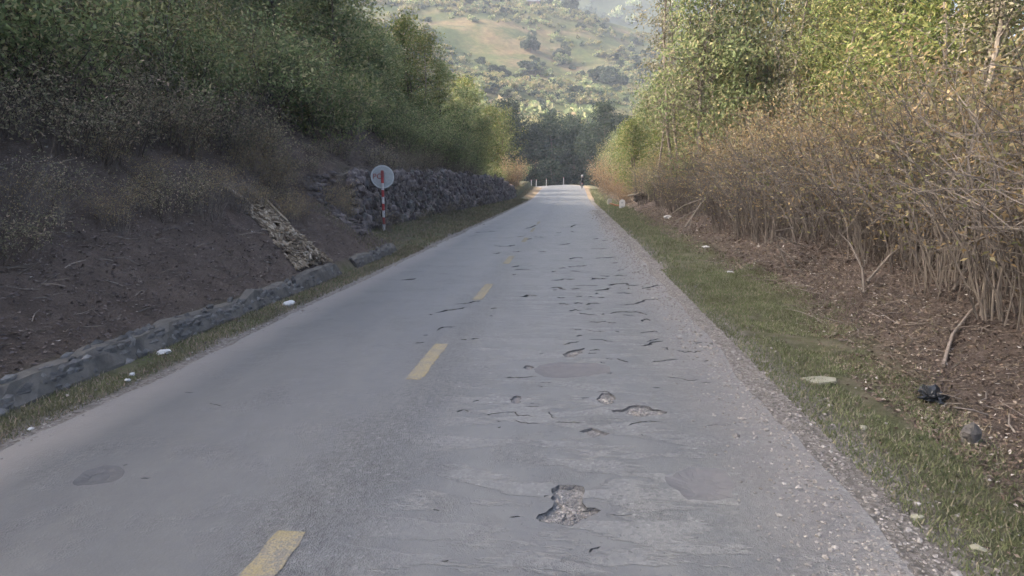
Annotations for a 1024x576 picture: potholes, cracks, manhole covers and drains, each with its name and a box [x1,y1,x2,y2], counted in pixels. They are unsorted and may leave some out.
crack [476,225,712,389]
pothole [596,393,616,405]
pothole [563,348,585,357]
crack [457,376,581,428]
pothole [612,405,667,417]
crack [420,301,493,343]
pothole [536,484,601,526]
pothole [579,428,610,438]
